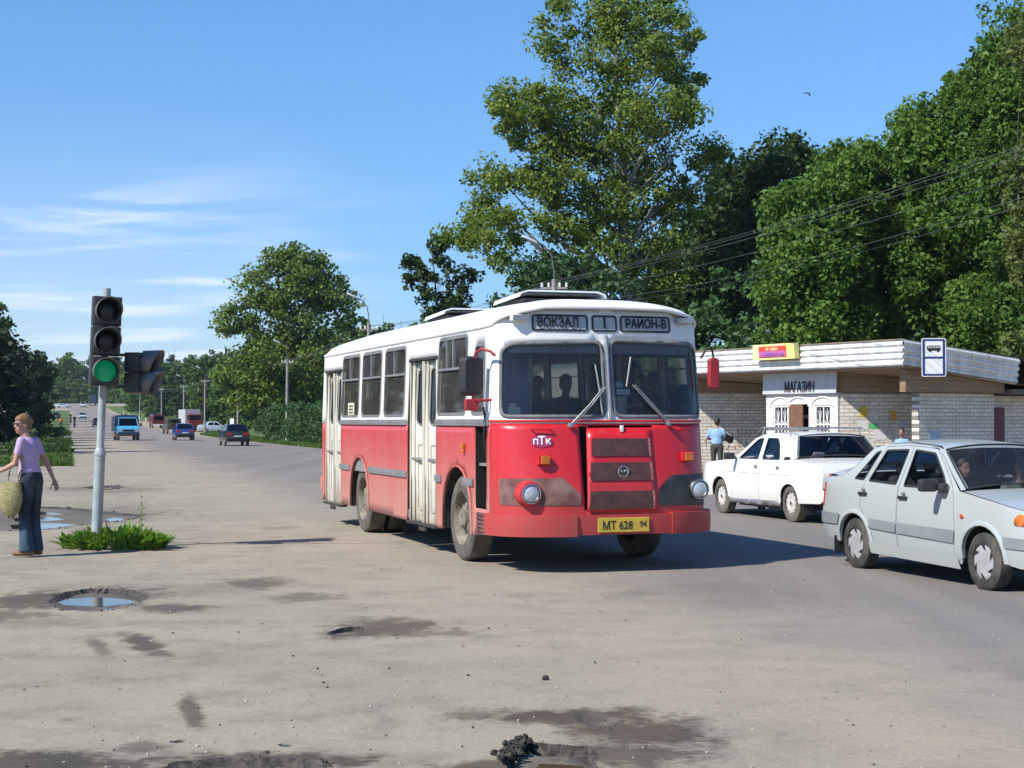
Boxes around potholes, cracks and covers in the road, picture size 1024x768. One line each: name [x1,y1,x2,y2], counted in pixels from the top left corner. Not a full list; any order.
pothole [490,733,602,768]
pothole [44,587,150,612]
pothole [0,506,146,531]
pothole [326,626,369,637]
